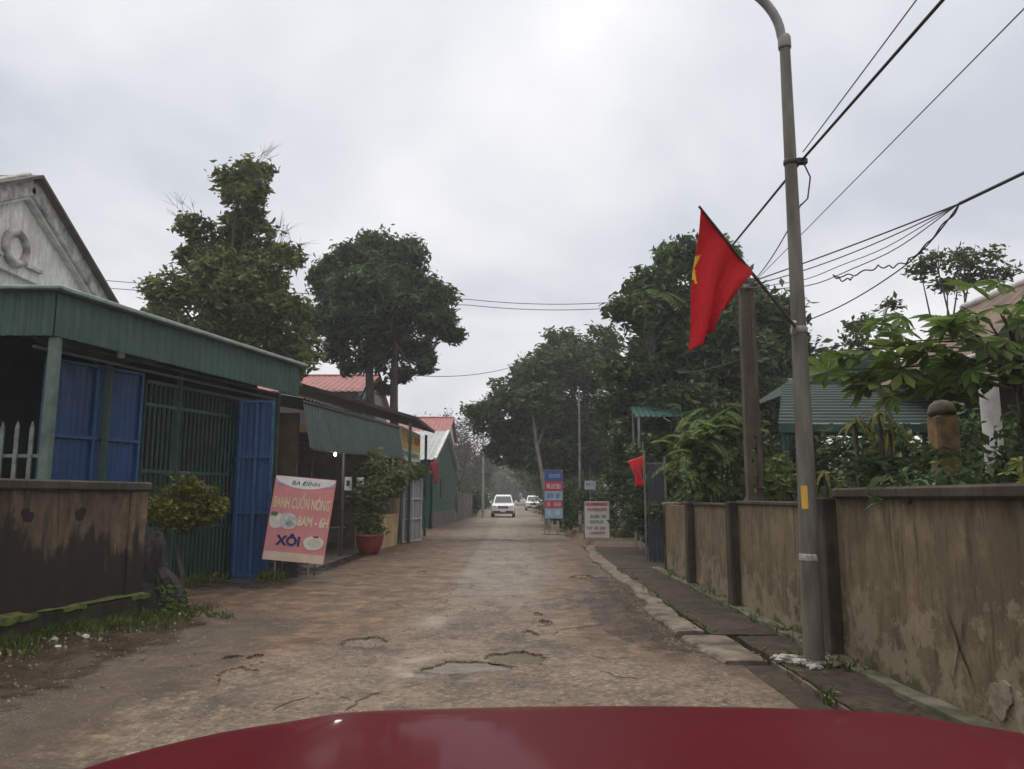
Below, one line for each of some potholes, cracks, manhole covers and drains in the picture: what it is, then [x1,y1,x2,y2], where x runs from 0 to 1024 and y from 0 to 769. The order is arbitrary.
crack [340,691,385,711]
pothole [336,636,394,649]
pothole [518,630,543,638]
pothole [535,619,557,627]
pothole [479,650,552,666]
pothole [414,660,520,675]
